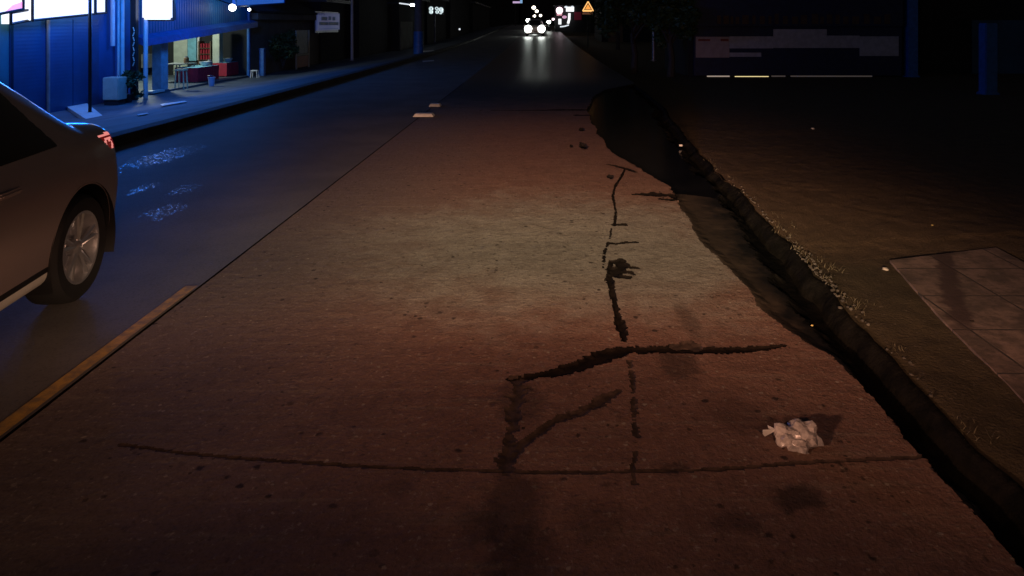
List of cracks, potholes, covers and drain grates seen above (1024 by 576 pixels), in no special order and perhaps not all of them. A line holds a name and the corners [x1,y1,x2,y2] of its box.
crack [117,164,923,485]
